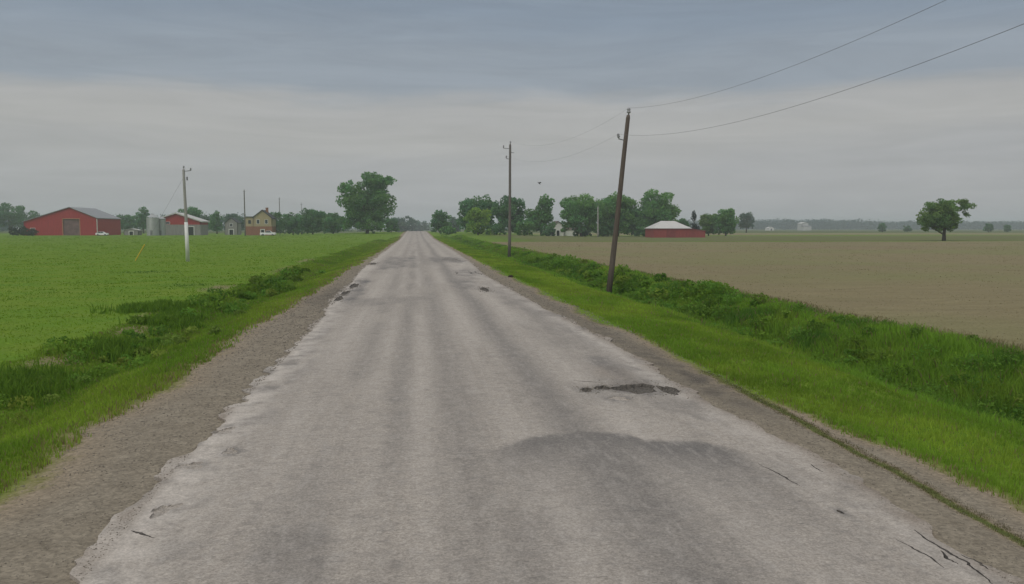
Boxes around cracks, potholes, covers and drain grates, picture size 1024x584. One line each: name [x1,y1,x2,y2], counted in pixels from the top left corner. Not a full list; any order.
crack [896,530,992,584]
pothole [656,386,679,395]
pothole [609,383,657,394]
pothole [149,503,183,519]
